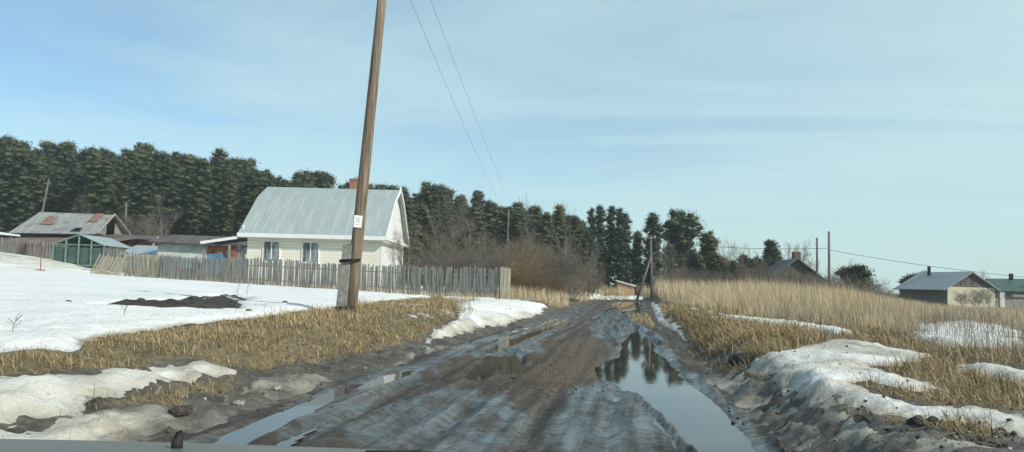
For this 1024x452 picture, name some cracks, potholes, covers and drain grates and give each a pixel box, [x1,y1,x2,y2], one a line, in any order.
pothole [439,346,538,385]
